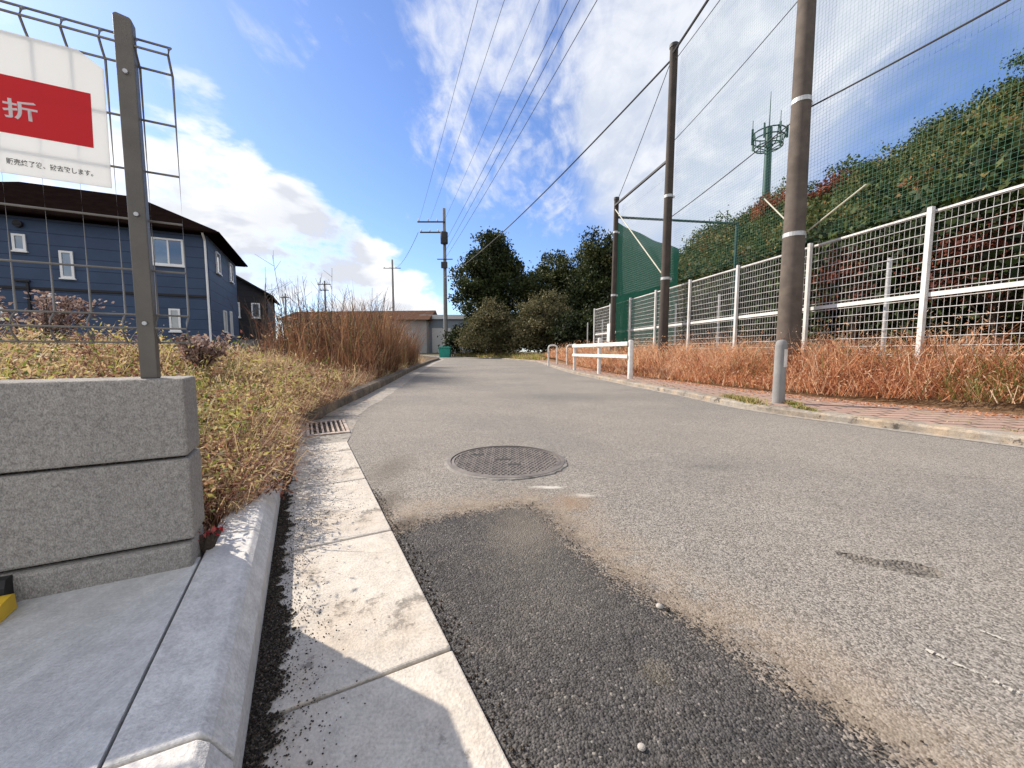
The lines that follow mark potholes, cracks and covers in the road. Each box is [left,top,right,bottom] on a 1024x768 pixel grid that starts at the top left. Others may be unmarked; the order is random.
manhole cover [444,445,568,481]
drain grate [306,419,350,437]
pothole [835,551,945,578]
